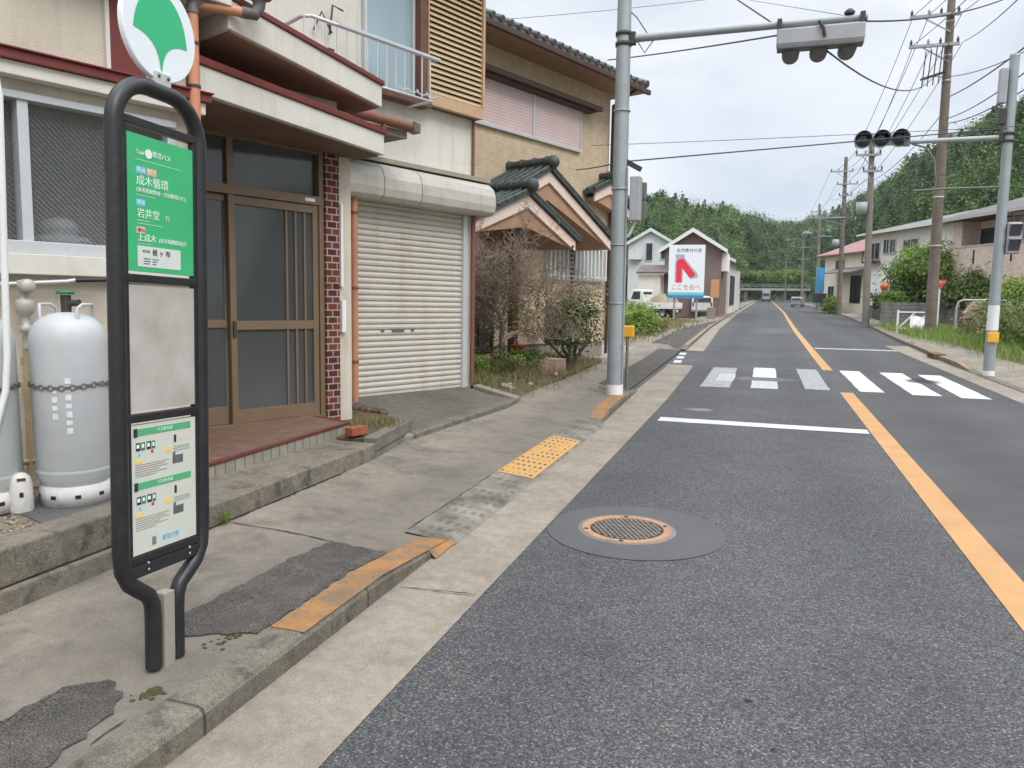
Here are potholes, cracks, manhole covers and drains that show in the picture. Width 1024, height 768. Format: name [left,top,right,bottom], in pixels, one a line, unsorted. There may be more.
manhole cover [548,506,727,561]
